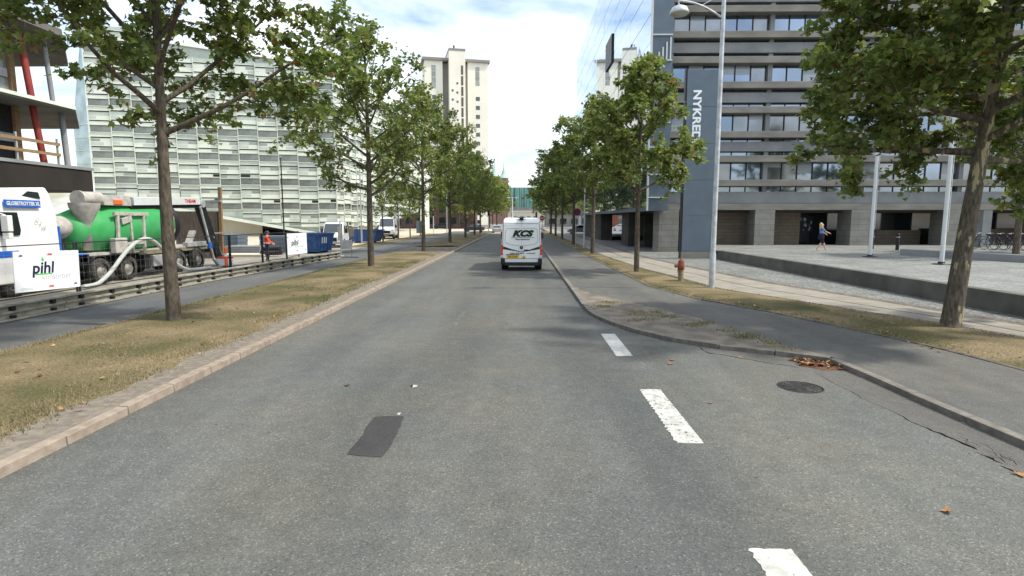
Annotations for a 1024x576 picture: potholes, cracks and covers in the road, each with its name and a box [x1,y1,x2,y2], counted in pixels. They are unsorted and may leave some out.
manhole cover [776,381,825,394]
crack [818,374,1017,472]
